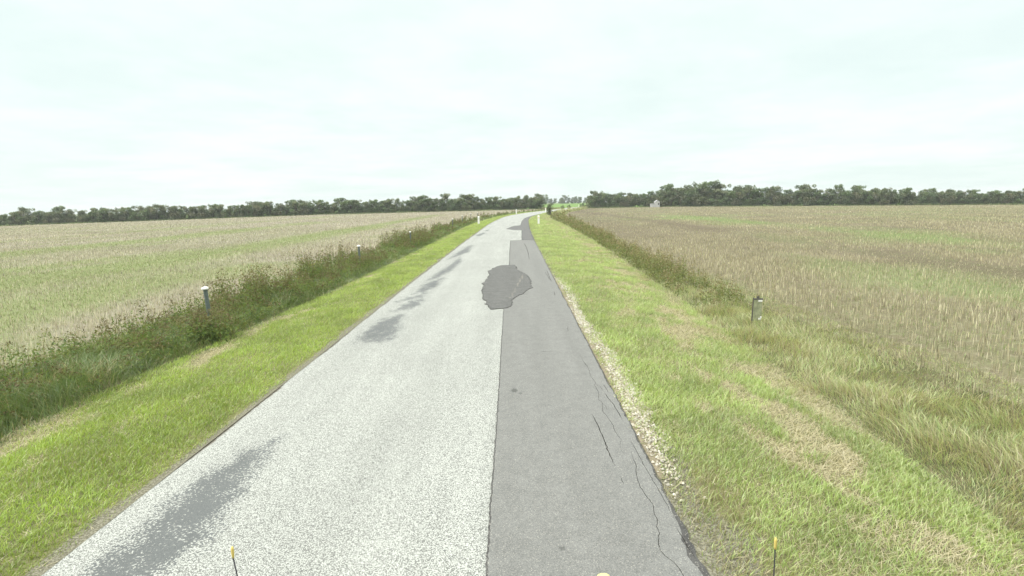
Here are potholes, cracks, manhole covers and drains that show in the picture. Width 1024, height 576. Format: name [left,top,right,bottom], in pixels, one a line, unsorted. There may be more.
crack [580,356,695,576]
